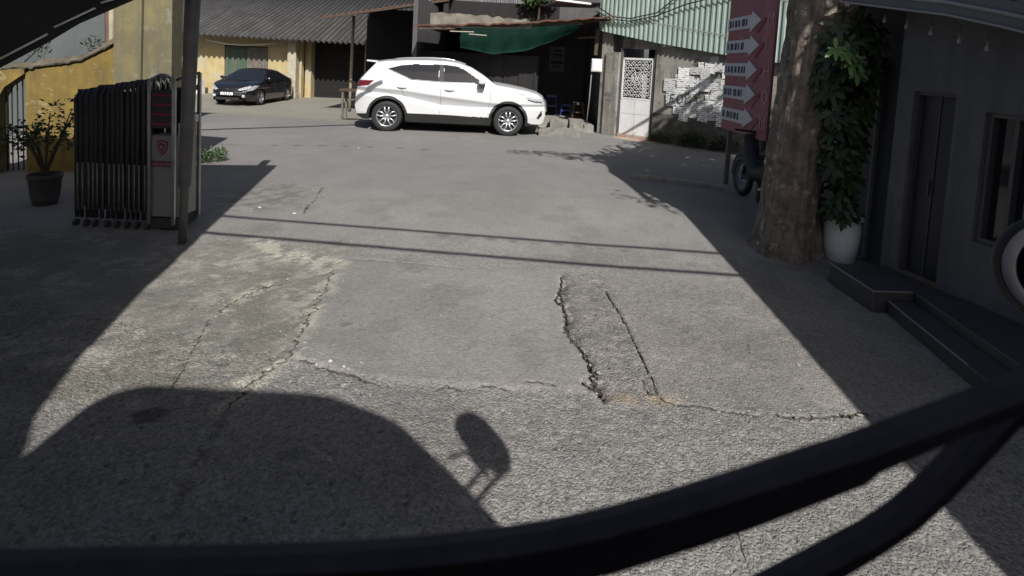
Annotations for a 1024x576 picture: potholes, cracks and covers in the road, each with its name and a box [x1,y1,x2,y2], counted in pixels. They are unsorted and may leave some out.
crack [169,284,281,391]
crack [299,360,381,386]
crack [480,275,759,418]
